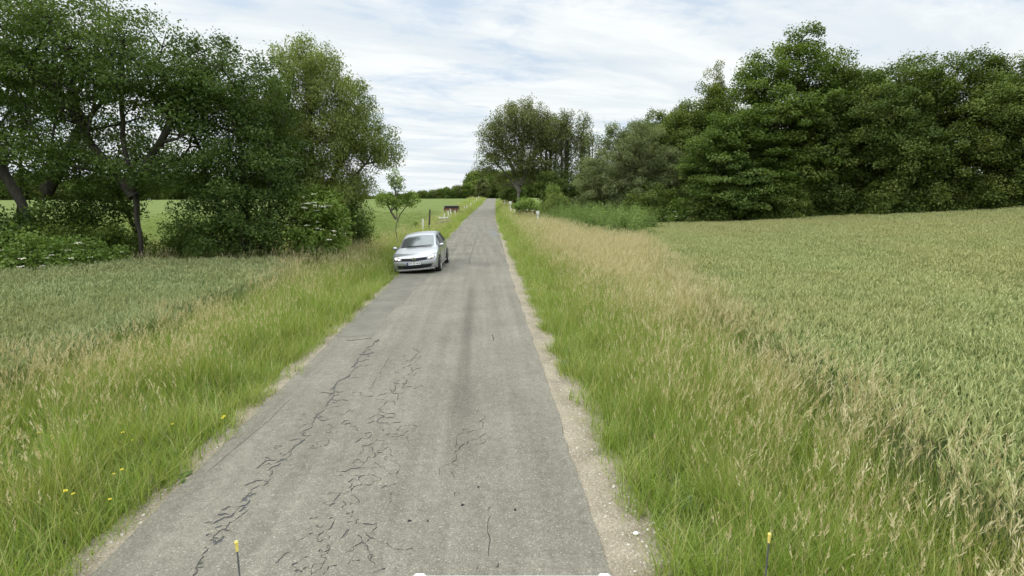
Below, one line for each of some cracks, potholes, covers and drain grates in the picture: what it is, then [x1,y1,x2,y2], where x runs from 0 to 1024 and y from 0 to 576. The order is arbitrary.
crack [477,507,499,569]
crack [193,338,422,576]
crack [439,412,486,496]
